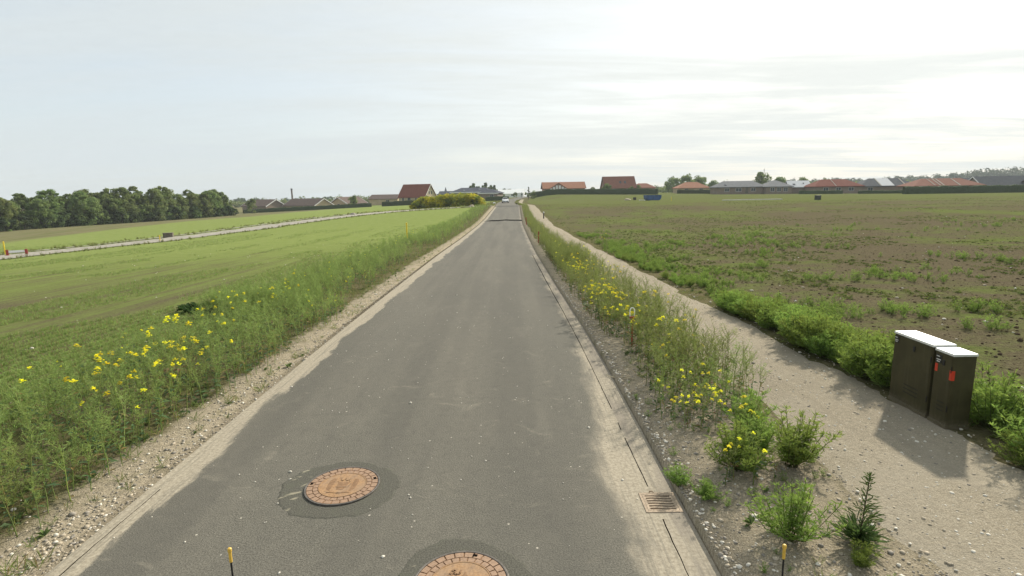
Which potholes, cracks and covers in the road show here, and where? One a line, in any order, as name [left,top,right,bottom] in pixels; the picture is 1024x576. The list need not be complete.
manhole cover [304,467,380,507]
manhole cover [415,551,509,576]
drain grate [638,491,683,513]
